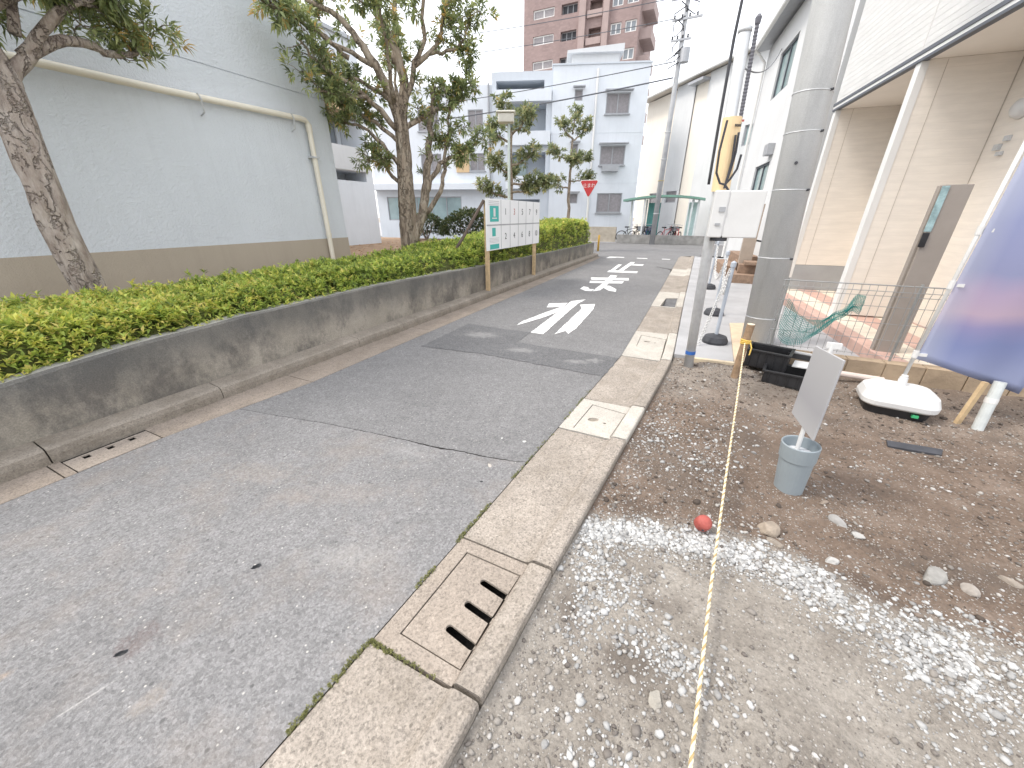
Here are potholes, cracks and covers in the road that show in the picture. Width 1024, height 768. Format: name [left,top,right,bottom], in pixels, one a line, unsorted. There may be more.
drain grate [651,292,680,309]
manhole cover [559,399,630,440]
manhole cover [622,331,668,362]
